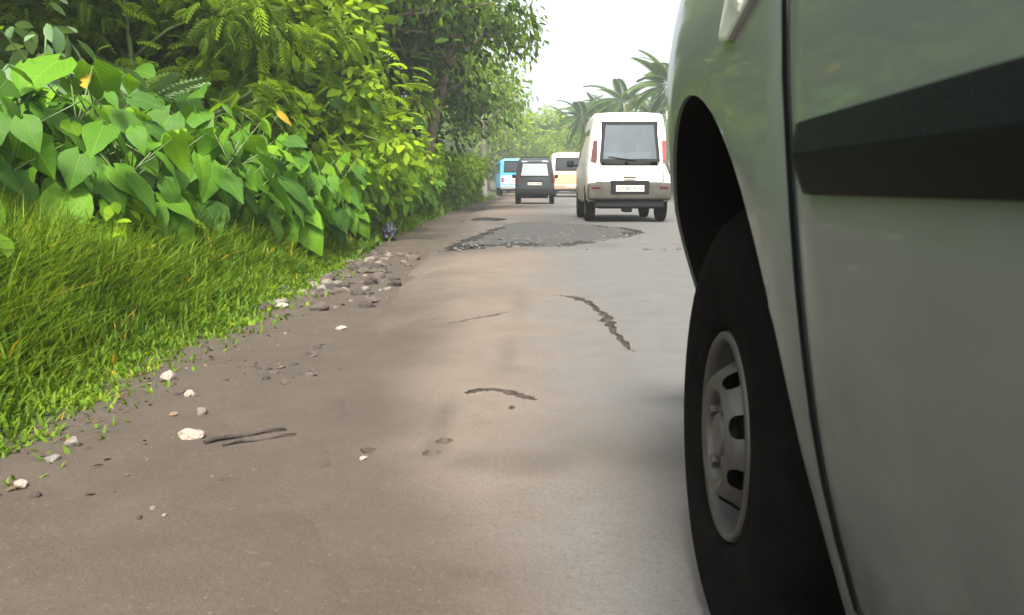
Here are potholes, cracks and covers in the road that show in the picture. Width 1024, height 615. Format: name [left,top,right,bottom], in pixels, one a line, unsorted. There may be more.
pothole [441,222,644,252]
crack [464,388,538,400]
crack [558,295,636,352]
crack [428,312,508,324]
